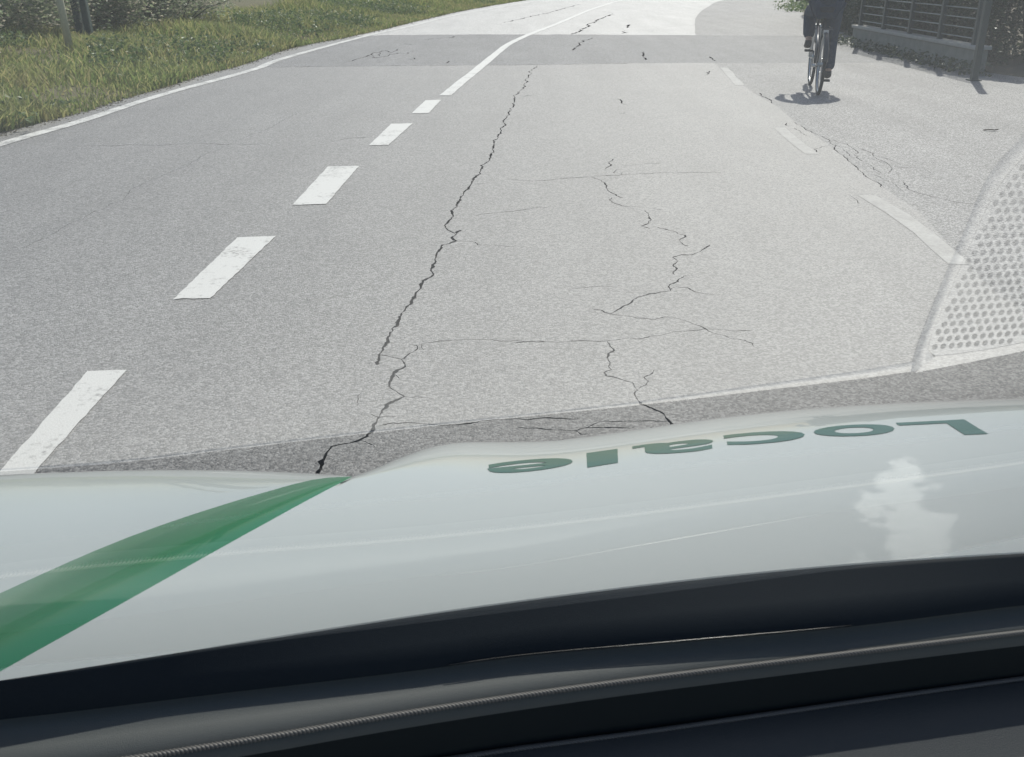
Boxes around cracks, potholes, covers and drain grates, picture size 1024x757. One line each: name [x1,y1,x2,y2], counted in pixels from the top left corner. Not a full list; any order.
crack [504,4,629,50]
crack [316,68,753,474]
crack [785,123,971,204]
